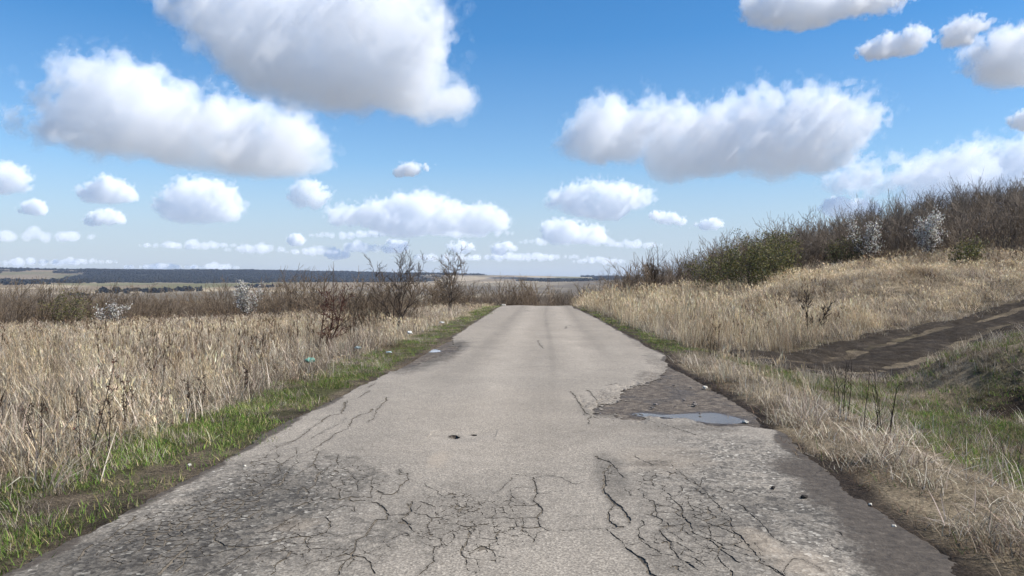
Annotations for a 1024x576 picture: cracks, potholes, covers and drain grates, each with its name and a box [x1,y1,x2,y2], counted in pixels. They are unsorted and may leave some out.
crack [312,385,387,438]
pothole [593,366,762,428]
crack [62,401,582,576]
crack [570,384,611,423]
crack [595,454,816,576]
